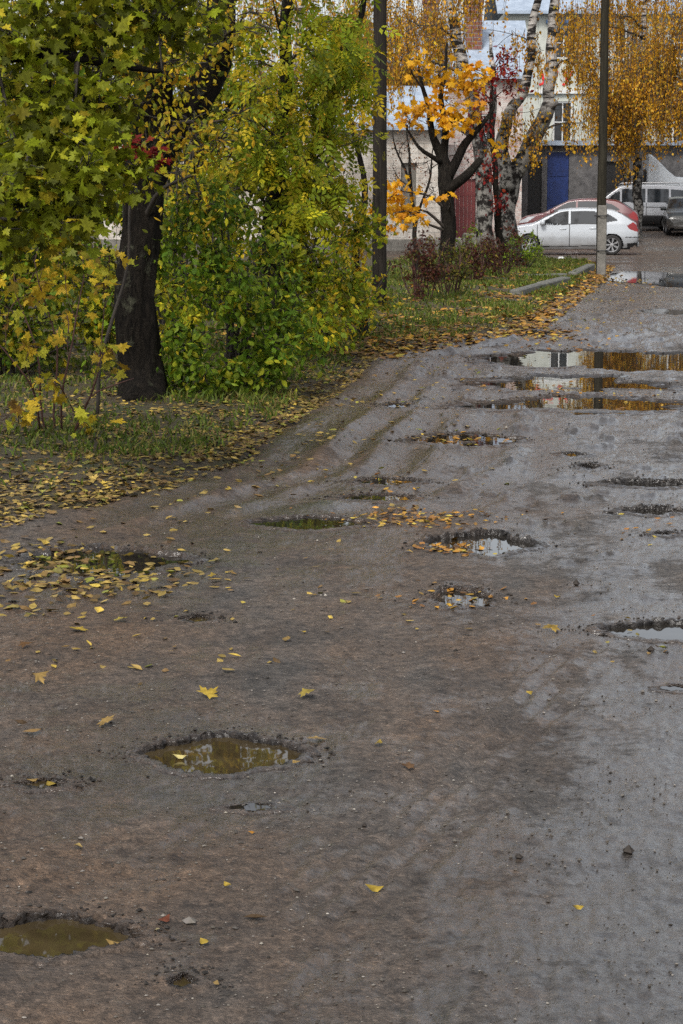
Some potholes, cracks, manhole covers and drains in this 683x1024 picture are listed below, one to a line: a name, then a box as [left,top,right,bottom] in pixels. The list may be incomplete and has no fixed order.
pothole [0,905,168,965]
pothole [151,966,214,998]
pothole [605,503,683,518]
pothole [125,729,320,779]
pothole [0,542,208,581]
pothole [413,527,552,560]
pothole [425,393,683,417]
pothole [448,373,683,394]
pothole [585,476,683,490]
pothole [230,513,397,532]
pothole [597,271,683,289]
pothole [463,347,683,374]
